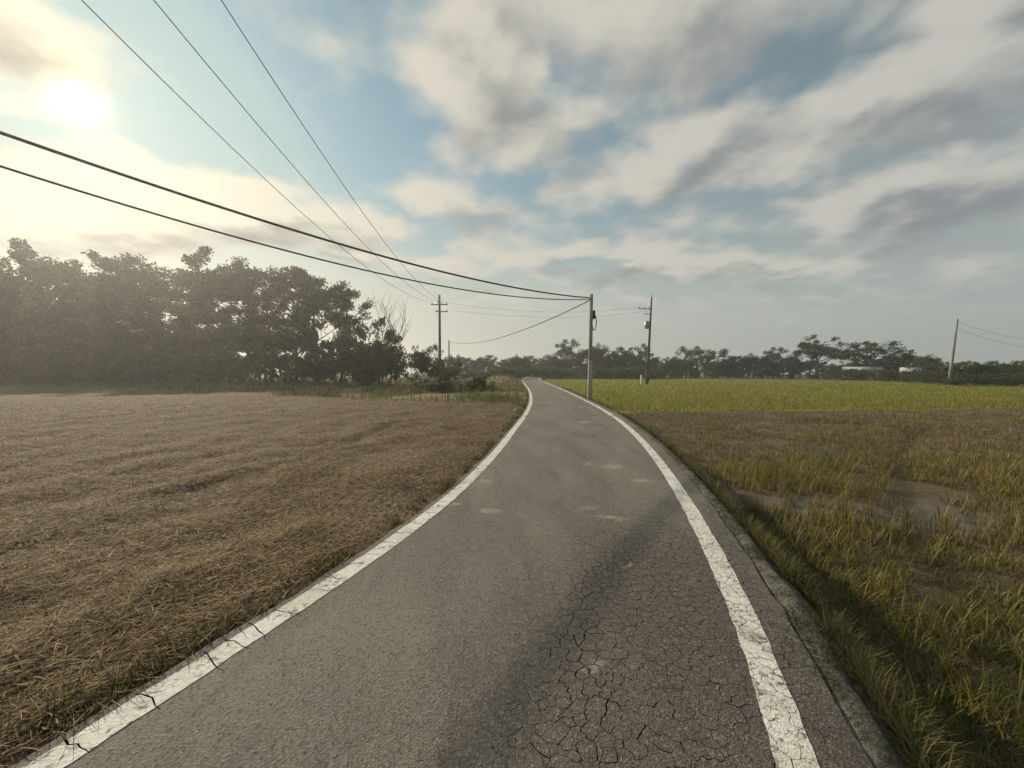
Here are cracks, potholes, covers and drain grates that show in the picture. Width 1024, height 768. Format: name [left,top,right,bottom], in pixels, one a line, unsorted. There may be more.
crack [202,610,301,671]
crack [443,496,865,768]
